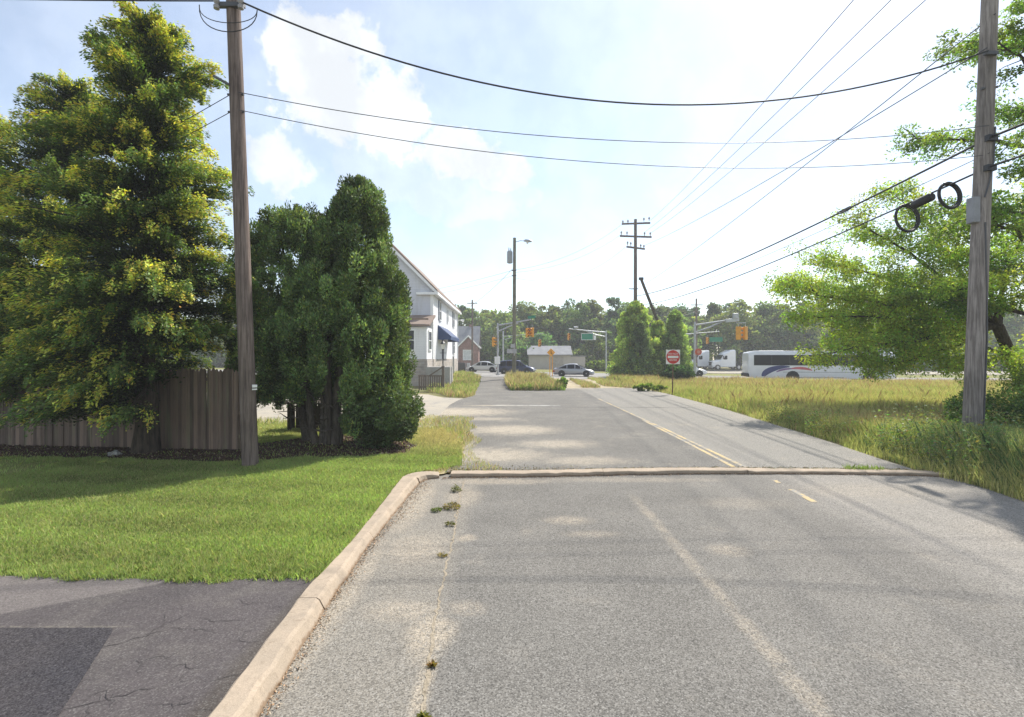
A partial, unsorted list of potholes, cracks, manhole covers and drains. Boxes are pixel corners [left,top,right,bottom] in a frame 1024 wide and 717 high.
crack [419,480,466,716]
crack [64,599,282,716]
